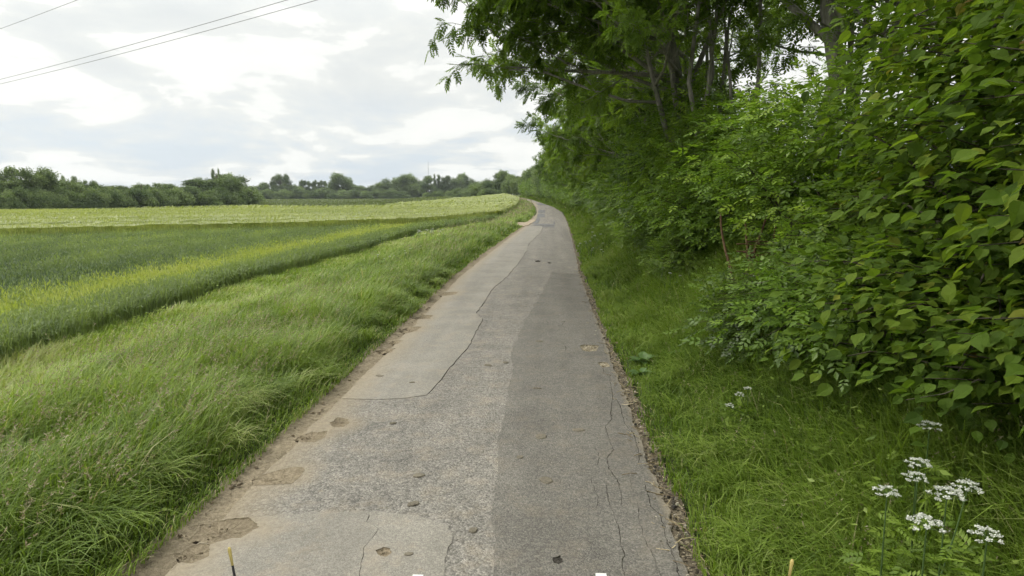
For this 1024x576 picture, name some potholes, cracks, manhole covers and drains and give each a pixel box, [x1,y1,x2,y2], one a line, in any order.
pothole [174,544,210,564]
pothole [294,431,327,442]
pothole [189,518,258,545]
pothole [330,417,349,427]
pothole [252,467,305,485]
crack [591,369,680,576]
